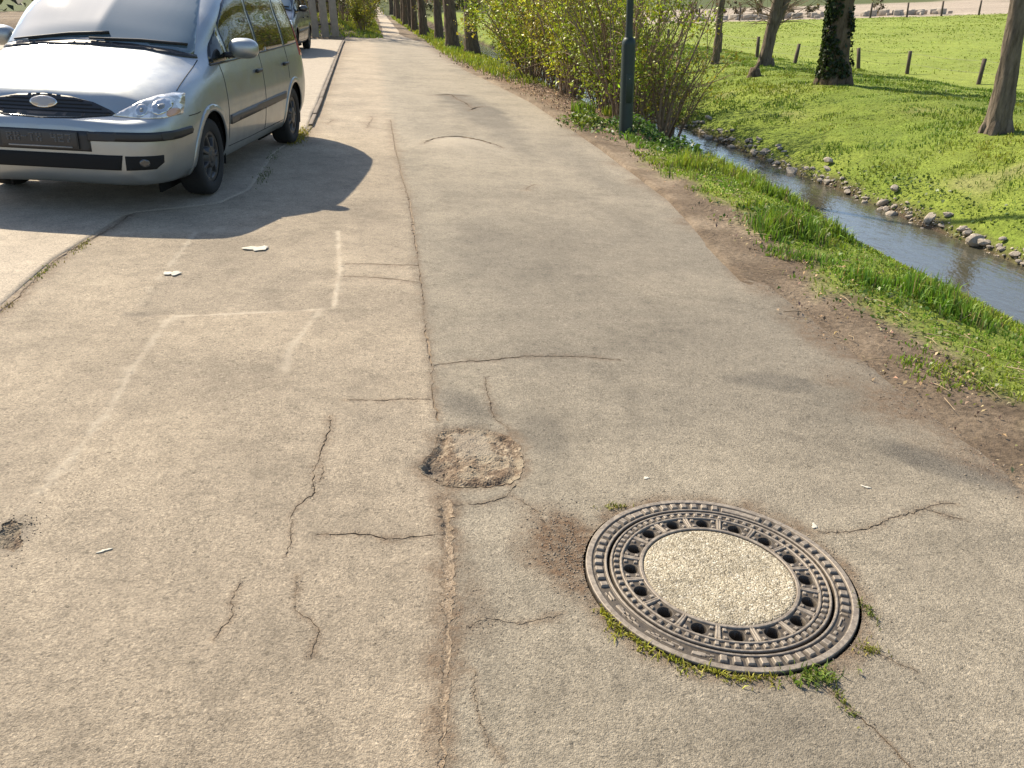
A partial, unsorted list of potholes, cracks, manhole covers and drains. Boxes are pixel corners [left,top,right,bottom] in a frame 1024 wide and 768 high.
pothole [0,520,23,552]
crack [286,417,331,653]
crack [424,136,501,147]
crack [817,503,960,534]
manhole cover [584,500,859,677]
crack [437,356,620,427]
crack [822,683,911,768]
pothole [418,428,524,488]
